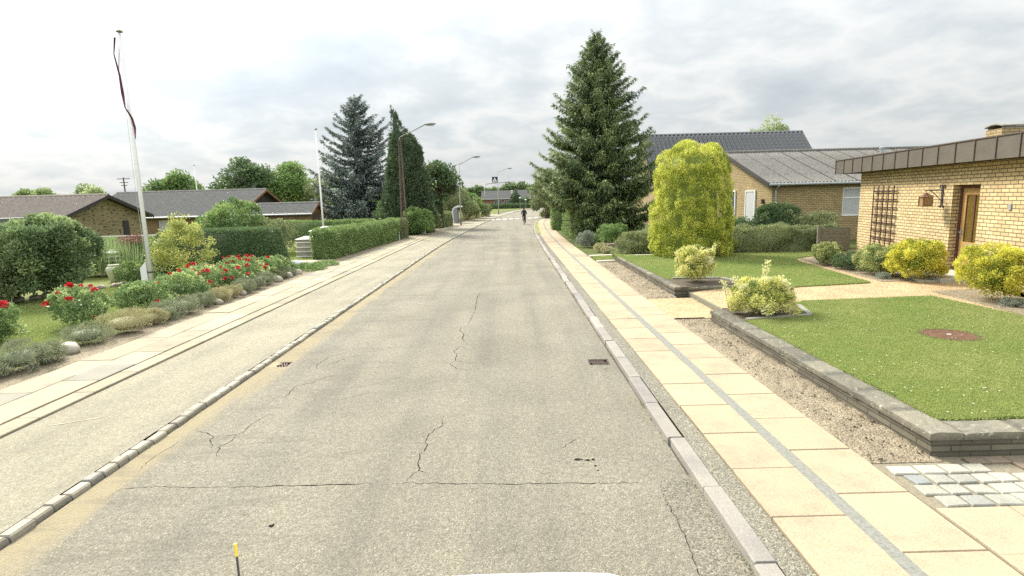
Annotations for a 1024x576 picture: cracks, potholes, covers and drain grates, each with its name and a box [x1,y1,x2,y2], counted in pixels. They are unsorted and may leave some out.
manhole cover [916,328,984,342]
crack [115,417,636,493]
crack [199,352,396,456]
